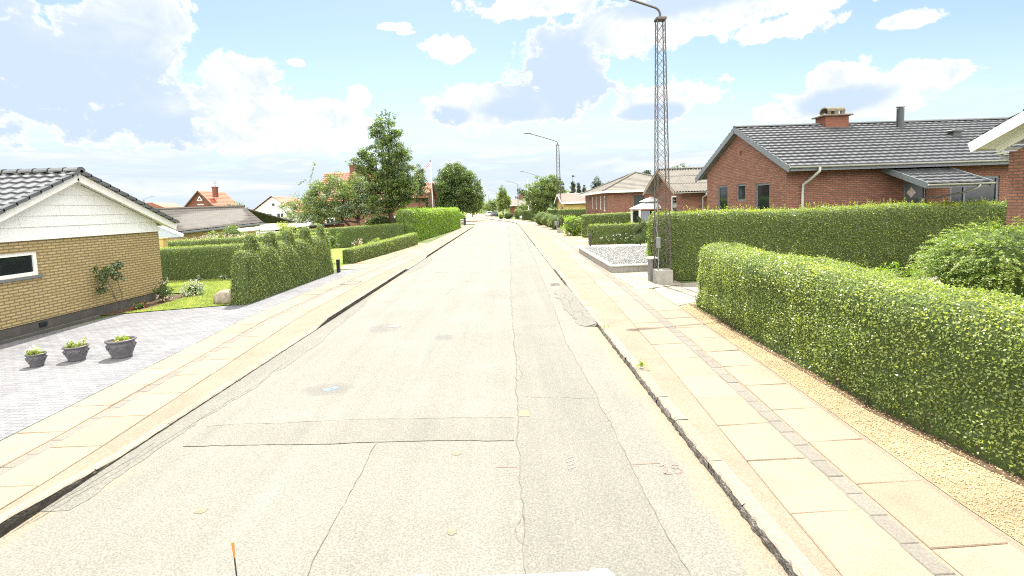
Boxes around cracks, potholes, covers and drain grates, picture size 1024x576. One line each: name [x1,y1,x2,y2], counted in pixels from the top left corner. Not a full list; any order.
crack [531,251,691,576]
crack [14,227,569,576]
